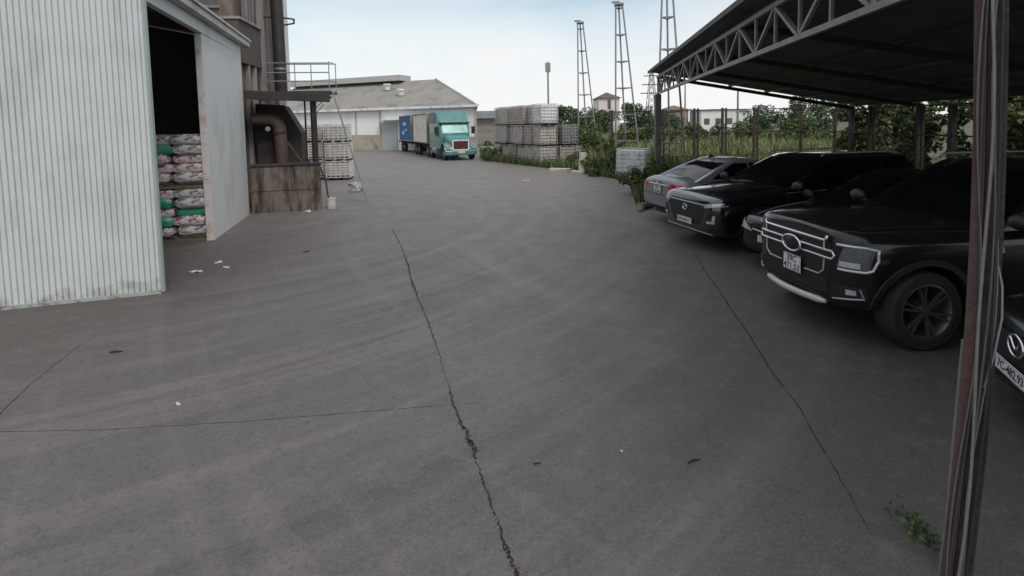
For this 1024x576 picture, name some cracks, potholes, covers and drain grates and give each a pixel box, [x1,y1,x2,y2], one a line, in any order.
crack [392,228,527,576]
